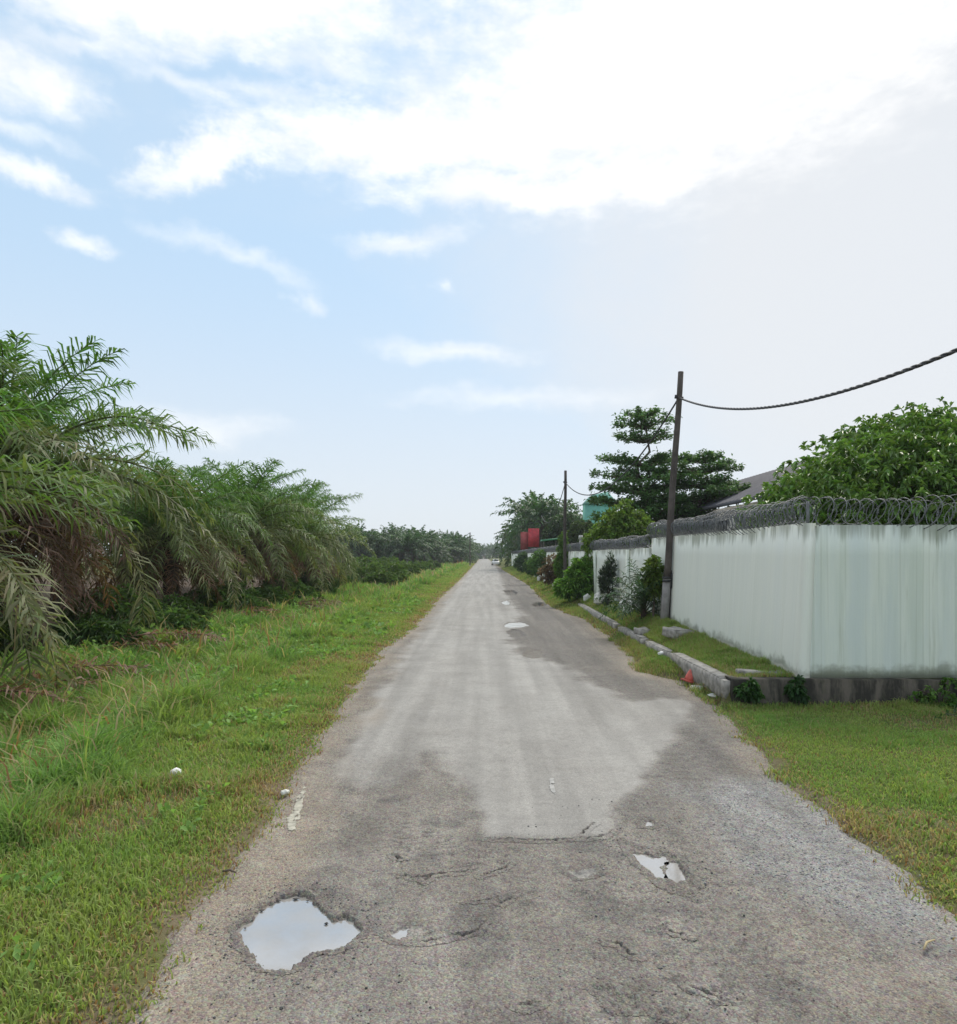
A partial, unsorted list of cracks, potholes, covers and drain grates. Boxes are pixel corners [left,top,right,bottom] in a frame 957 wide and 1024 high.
pothole [227,886,369,977]
pothole [490,621,543,629]
crack [595,925,698,962]
crack [386,820,619,947]
crack [677,980,733,1006]
pothole [616,837,704,898]
